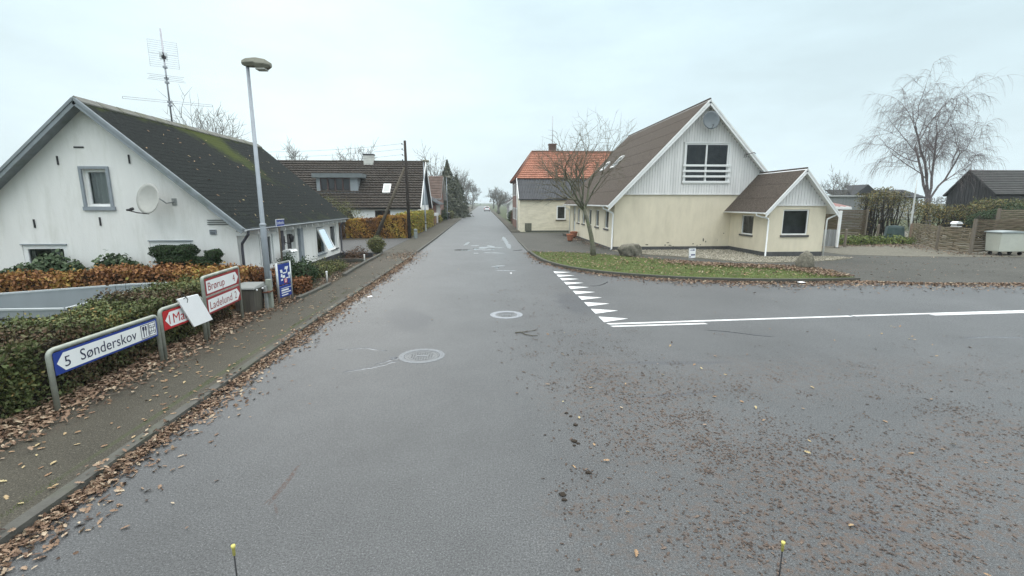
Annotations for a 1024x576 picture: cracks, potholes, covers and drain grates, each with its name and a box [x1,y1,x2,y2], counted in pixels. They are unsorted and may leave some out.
manhole cover [490,311,523,319]
manhole cover [399,349,445,363]
